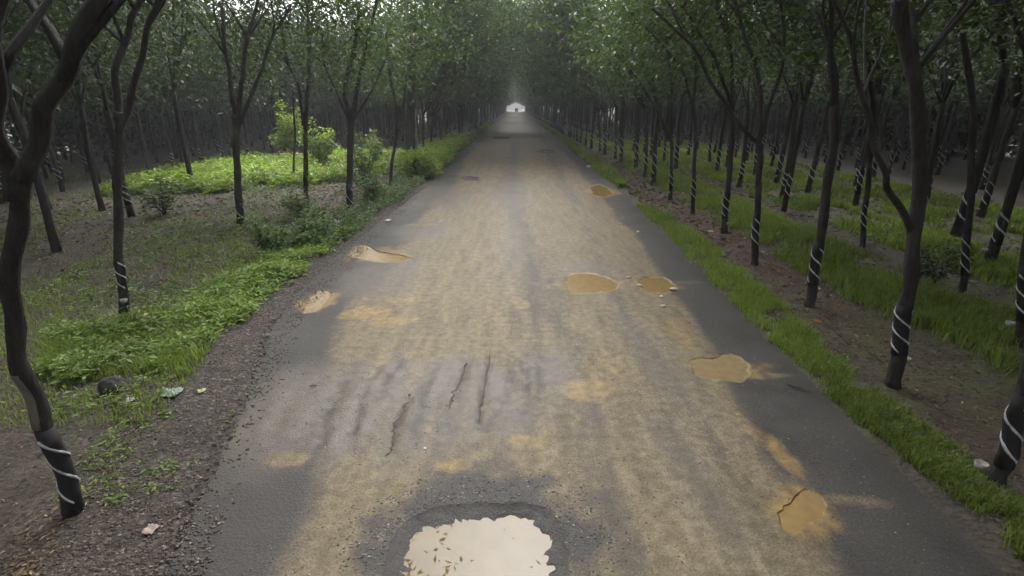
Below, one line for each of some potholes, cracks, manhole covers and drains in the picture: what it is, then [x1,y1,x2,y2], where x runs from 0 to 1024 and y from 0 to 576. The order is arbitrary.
pothole [636,276,677,294]
pothole [382,501,570,576]
crack [449,355,490,425]
pothole [776,488,828,537]
pothole [564,272,621,294]
pothole [349,244,413,263]
crack [384,403,408,457]
pothole [589,184,615,197]
pothole [688,353,752,383]
pothole [303,290,332,313]
